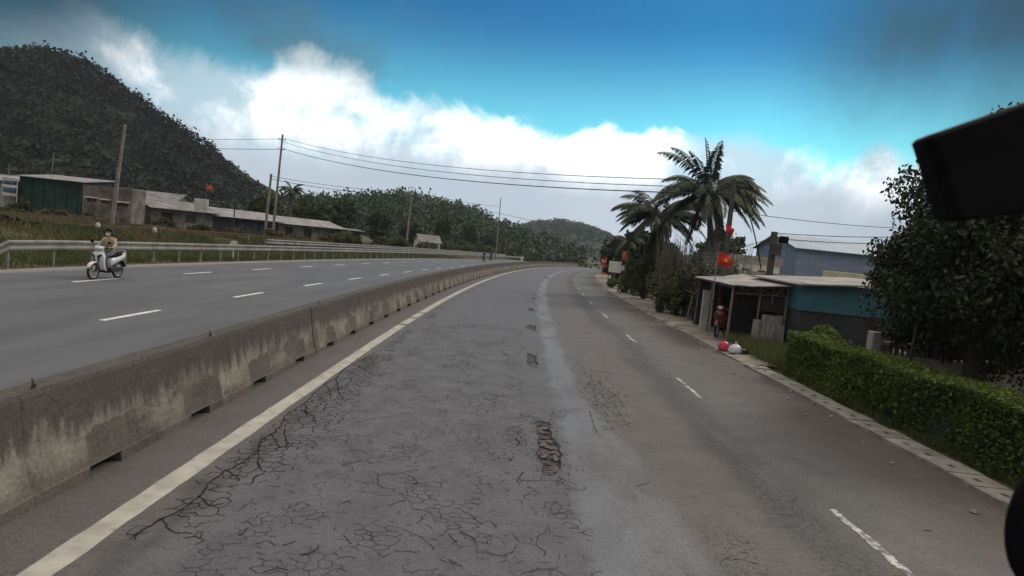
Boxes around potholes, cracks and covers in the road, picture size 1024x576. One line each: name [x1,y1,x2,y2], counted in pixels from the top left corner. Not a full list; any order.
crack [571,363,649,486]
pothole [526,419,581,479]
pothole [527,353,539,368]
crack [126,323,600,576]
